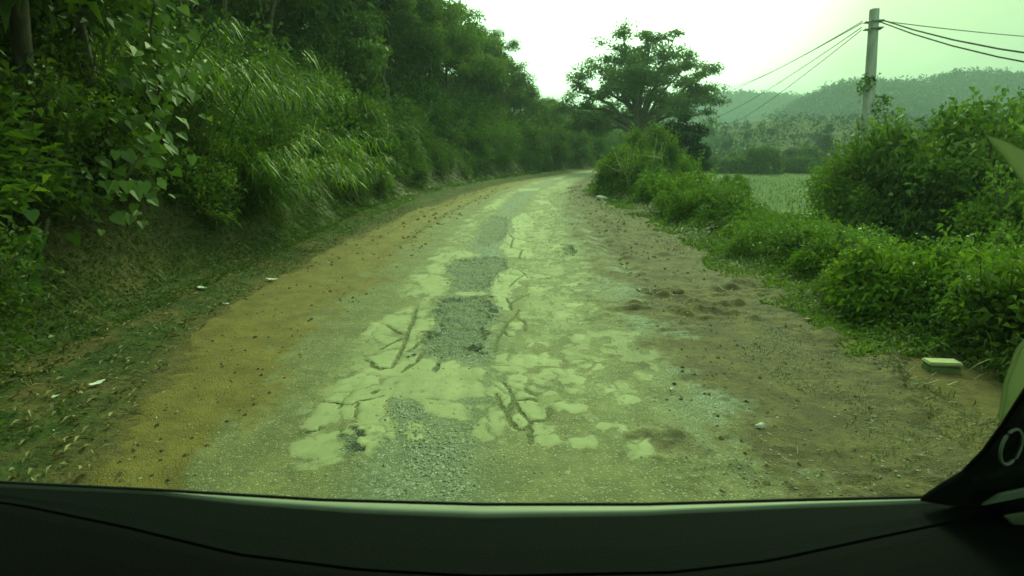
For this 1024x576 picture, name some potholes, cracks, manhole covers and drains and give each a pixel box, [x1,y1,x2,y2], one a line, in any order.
crack [365,309,429,373]
pothole [444,256,510,292]
crack [327,396,384,417]
crack [496,383,550,445]
pothole [420,295,502,359]
pothole [338,427,367,454]
crack [493,233,552,353]
